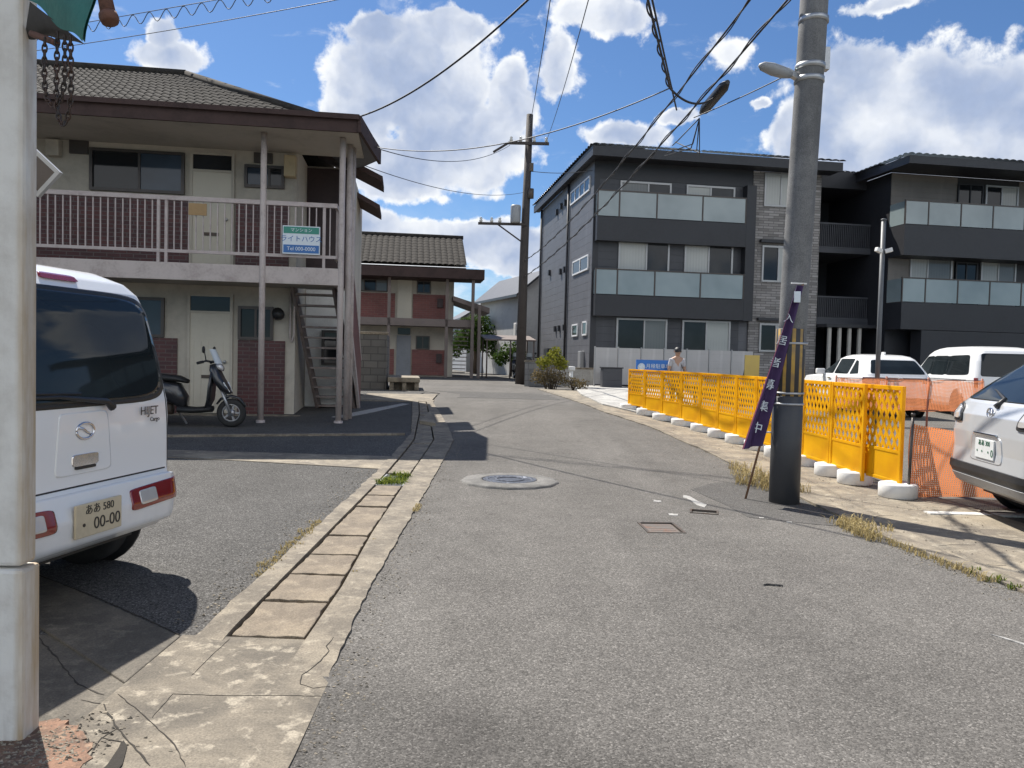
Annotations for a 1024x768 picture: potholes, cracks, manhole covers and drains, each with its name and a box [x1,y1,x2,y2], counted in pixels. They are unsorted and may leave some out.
crack [300,638,333,688]
manhole cover [460,473,559,490]
